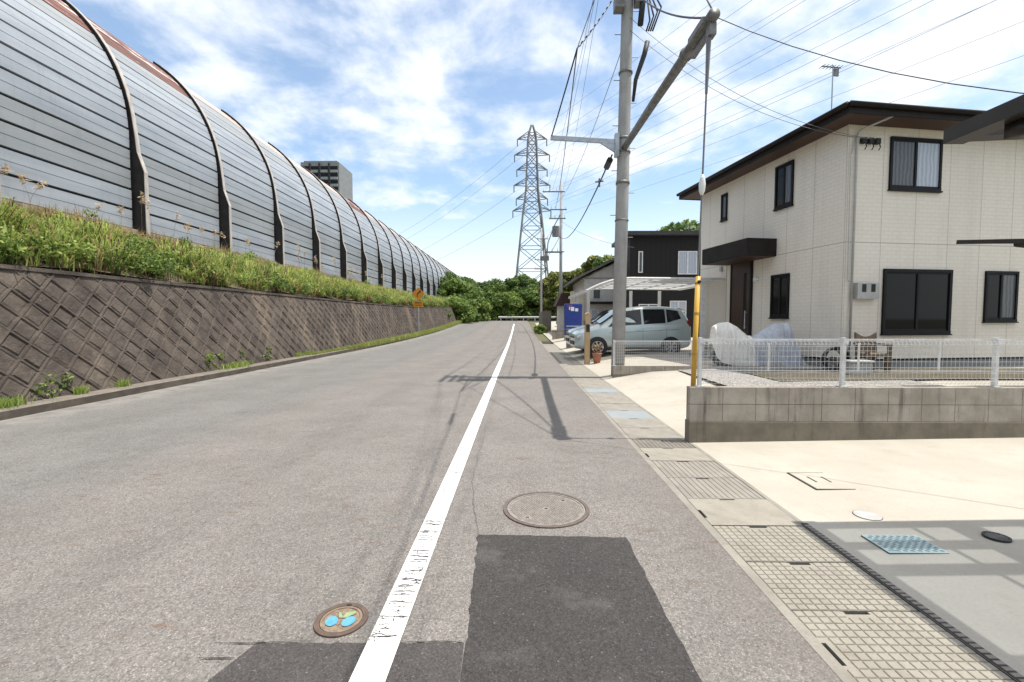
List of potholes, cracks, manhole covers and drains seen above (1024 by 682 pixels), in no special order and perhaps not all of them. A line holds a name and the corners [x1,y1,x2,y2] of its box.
manhole cover [313,603,368,638]
manhole cover [503,492,589,529]
